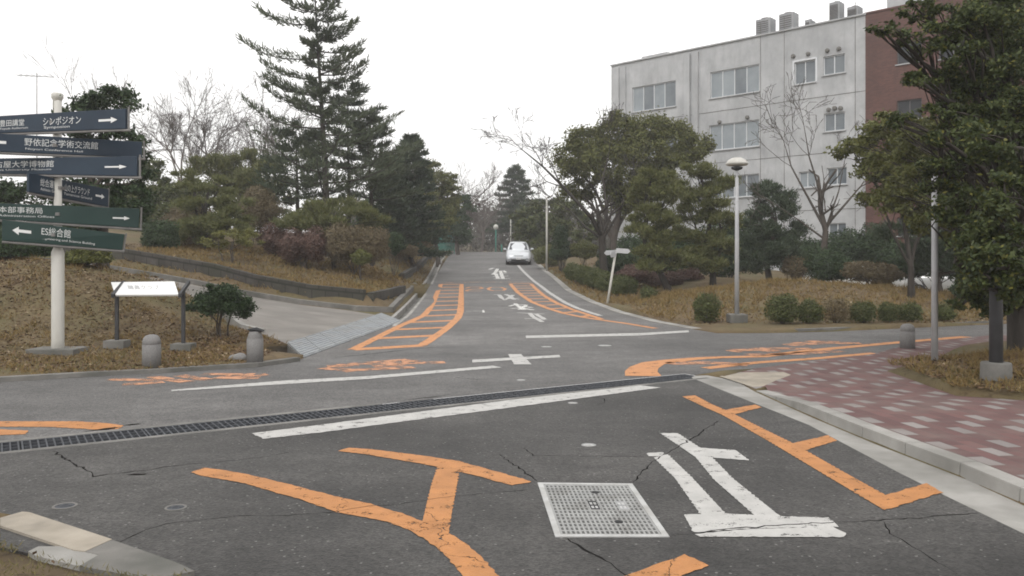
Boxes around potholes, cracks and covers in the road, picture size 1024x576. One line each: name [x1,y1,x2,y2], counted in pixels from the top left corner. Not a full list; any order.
crack [673,513,974,574]
crack [568,539,628,576]
crack [54,451,294,477]
crack [633,421,718,482]
crack [122,455,538,541]
manhole cover [52,502,78,510]
manhole cover [538,482,669,537]
